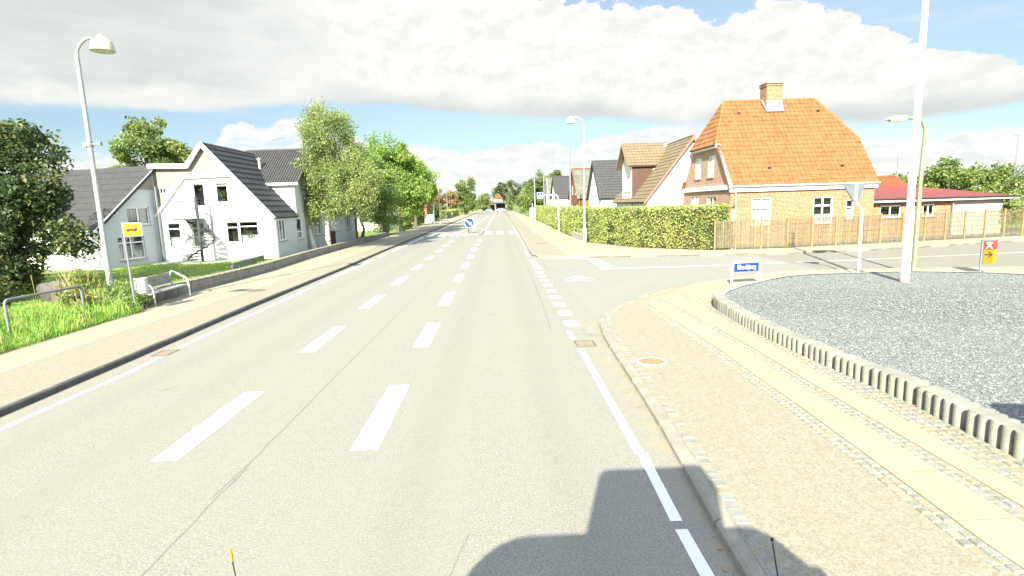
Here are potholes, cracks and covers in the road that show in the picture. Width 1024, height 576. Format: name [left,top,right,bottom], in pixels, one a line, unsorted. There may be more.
manhole cover [636,357,667,366]
crack [141,262,452,576]
